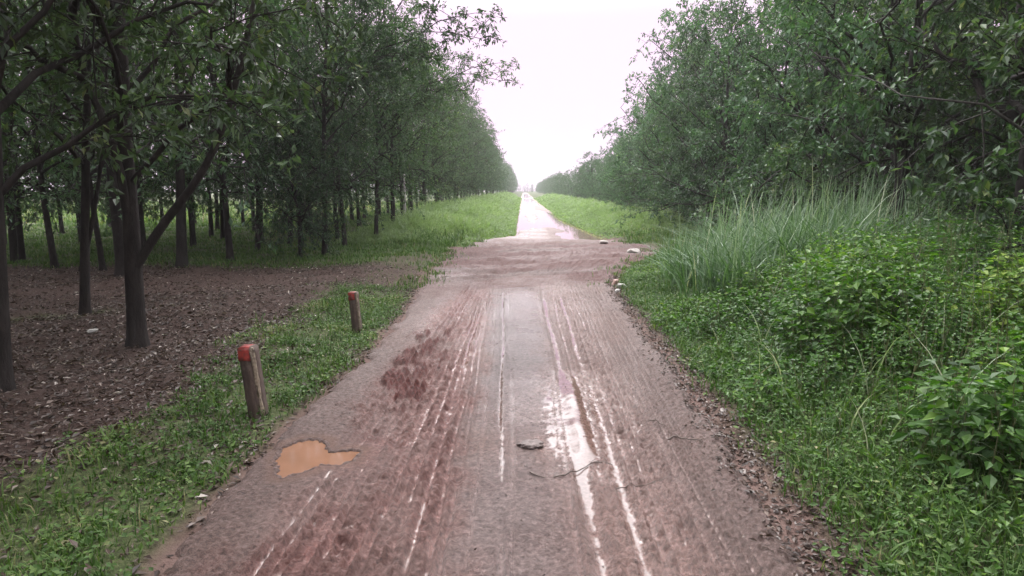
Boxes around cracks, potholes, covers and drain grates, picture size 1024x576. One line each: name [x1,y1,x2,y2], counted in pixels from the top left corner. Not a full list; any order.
pothole [269,437,364,479]
